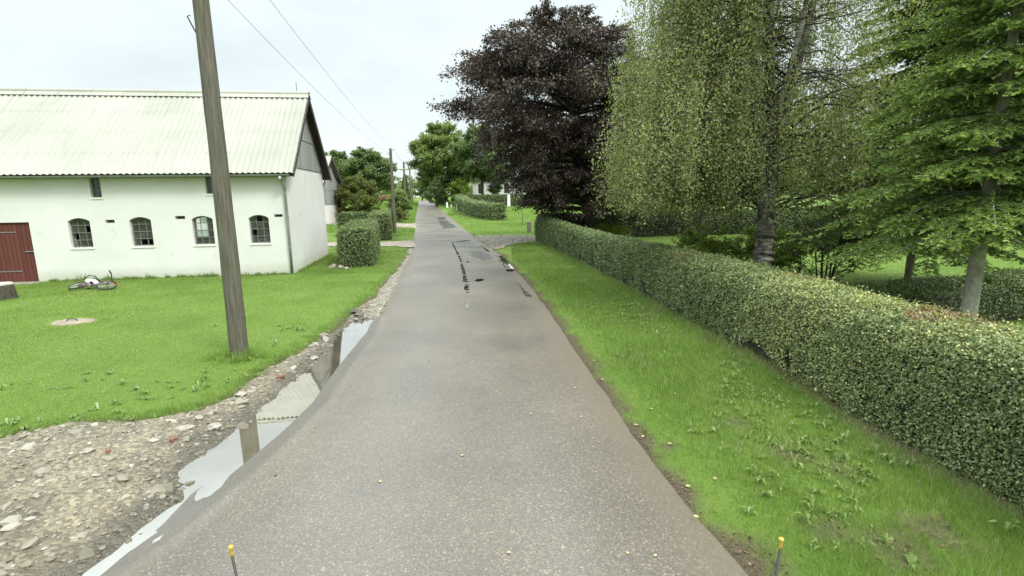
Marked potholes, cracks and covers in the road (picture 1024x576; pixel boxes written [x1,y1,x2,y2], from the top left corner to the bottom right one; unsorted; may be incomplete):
manhole cover [50,318,95,326]
